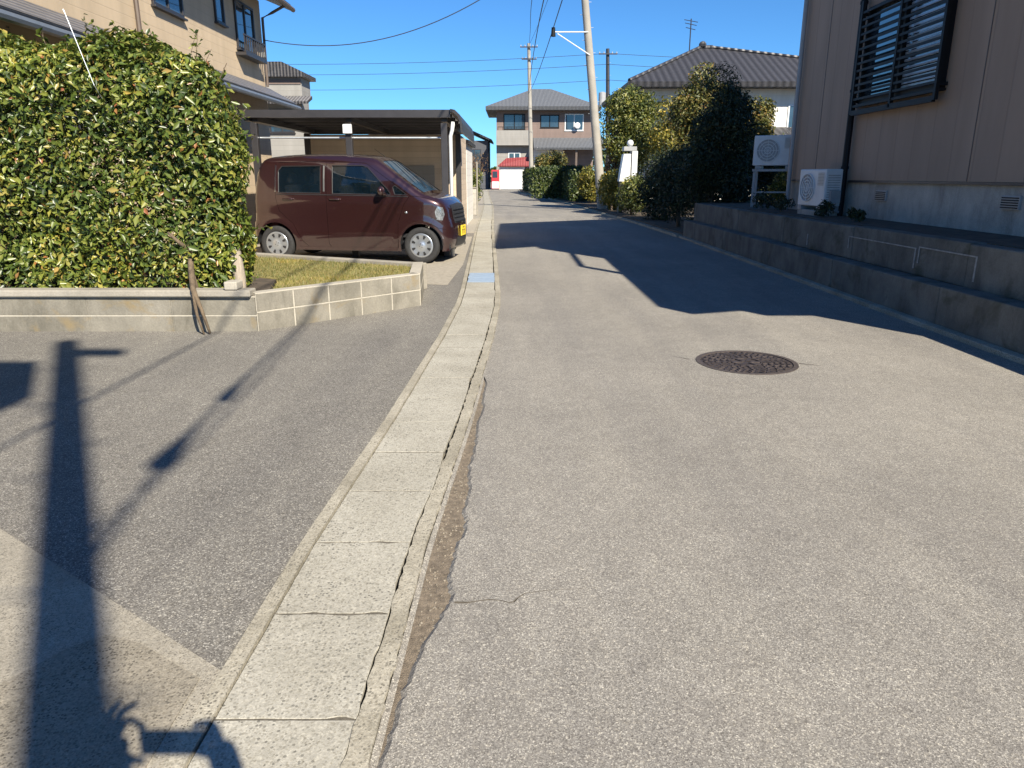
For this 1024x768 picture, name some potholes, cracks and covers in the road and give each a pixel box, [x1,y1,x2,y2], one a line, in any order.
pothole [369,377,487,768]
crack [454,589,562,603]
manhole cover [696,350,799,375]
